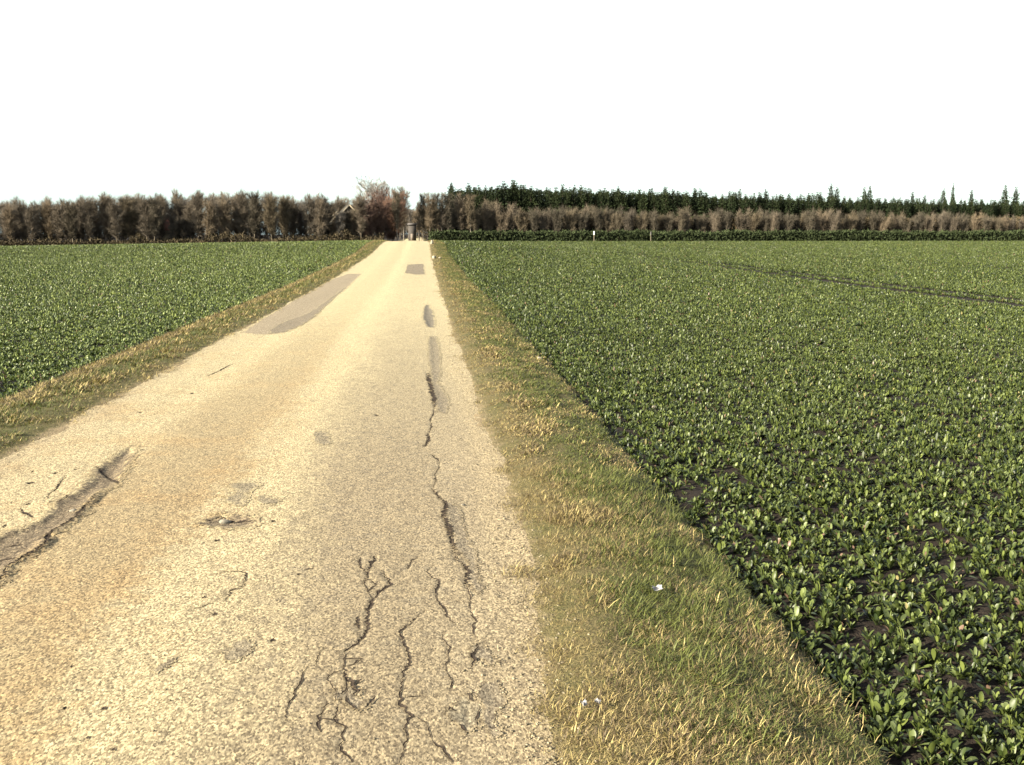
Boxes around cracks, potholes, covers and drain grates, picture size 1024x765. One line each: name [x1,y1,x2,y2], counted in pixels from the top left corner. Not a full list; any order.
pothole [0,444,142,586]
crack [285,373,481,765]
crack [194,571,247,609]
pothole [192,511,266,531]
